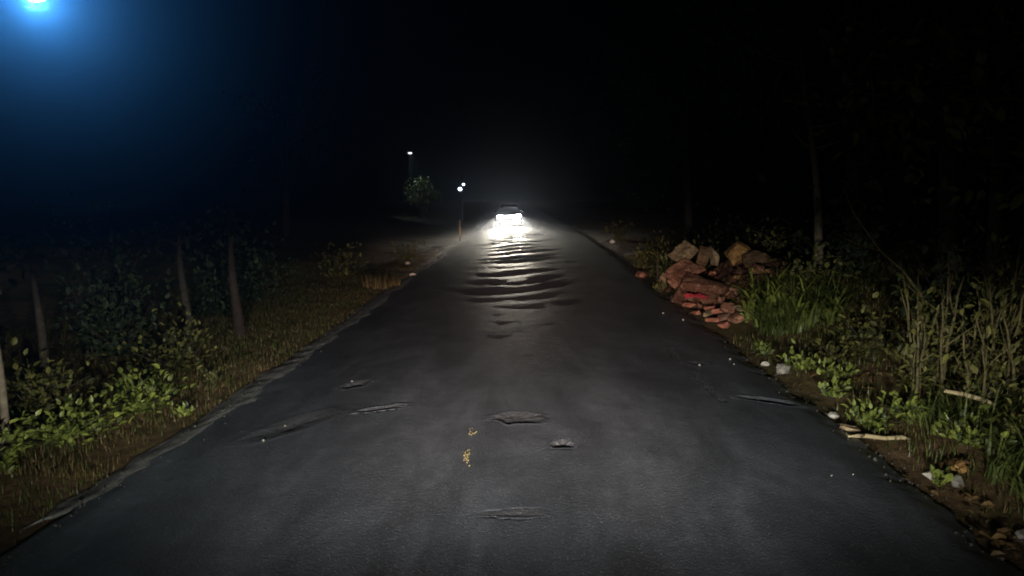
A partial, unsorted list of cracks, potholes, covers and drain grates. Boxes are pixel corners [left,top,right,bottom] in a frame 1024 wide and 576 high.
pothole [728,395,817,409]
pothole [546,438,578,449]
crack [668,348,726,402]
pothole [481,410,551,426]
pothole [221,405,354,448]
pothole [348,403,412,415]
pothole [334,378,378,391]
